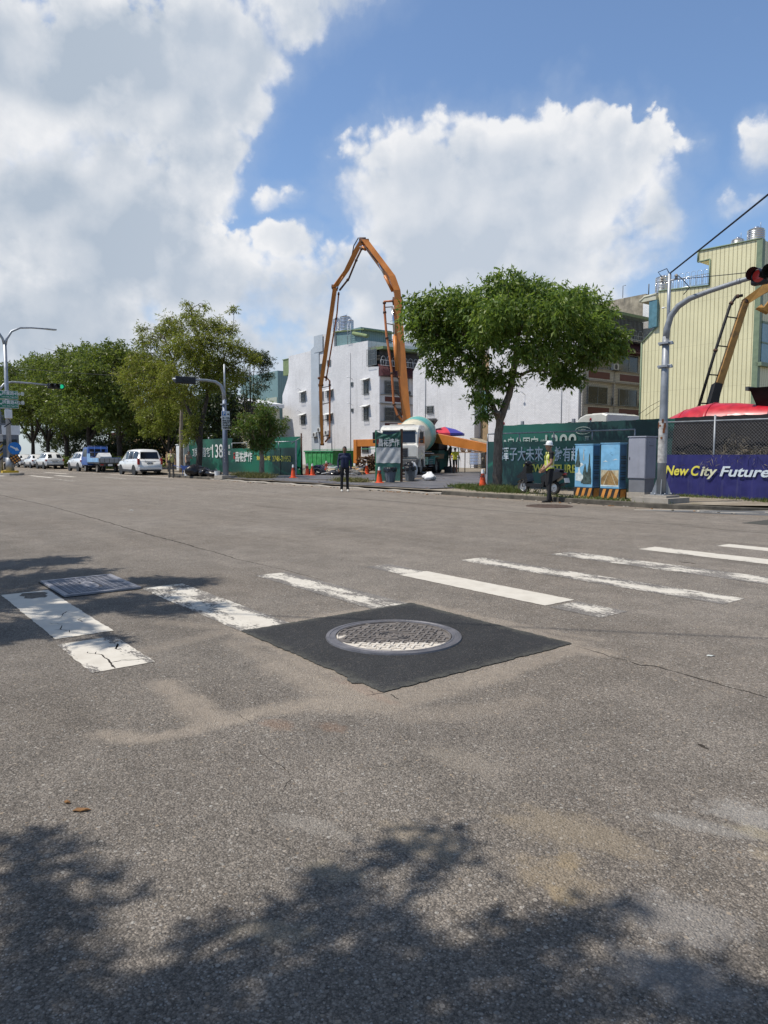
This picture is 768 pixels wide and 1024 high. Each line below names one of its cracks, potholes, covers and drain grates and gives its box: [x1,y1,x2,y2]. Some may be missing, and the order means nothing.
manhole cover [38,574,144,598]
crack [569,645,768,698]
crack [87,643,145,668]
manhole cover [326,619,462,655]
